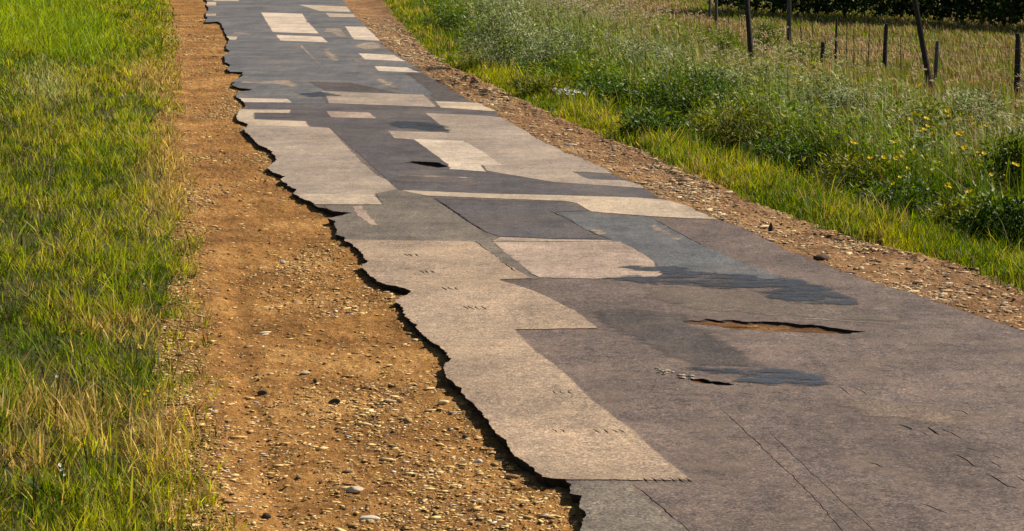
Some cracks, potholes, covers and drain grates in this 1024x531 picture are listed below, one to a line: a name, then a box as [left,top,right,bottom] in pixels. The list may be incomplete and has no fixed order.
pothole [654,368,734,385]
crack [712,401,874,531]
pothole [683,319,866,334]
crack [899,400,1024,489]
